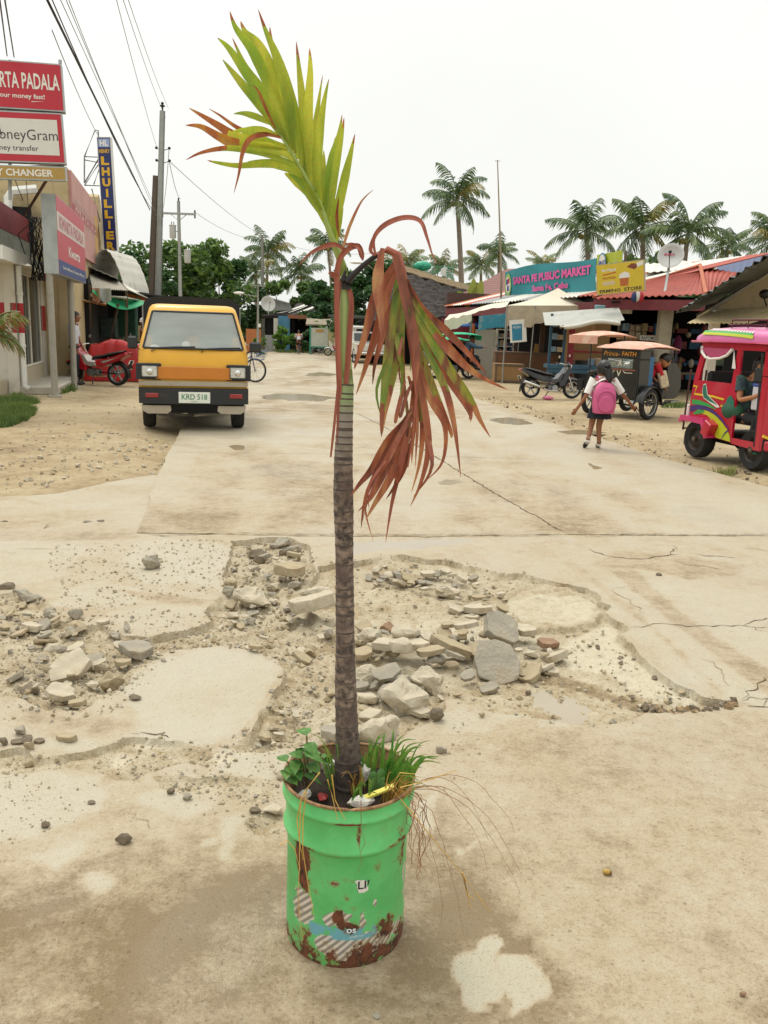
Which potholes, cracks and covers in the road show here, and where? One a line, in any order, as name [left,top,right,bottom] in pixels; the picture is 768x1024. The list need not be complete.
crack [611,586,766,631]
pothole [310,554,731,745]
crack [701,658,768,707]
crack [596,547,736,569]
pothole [0,592,152,712]
